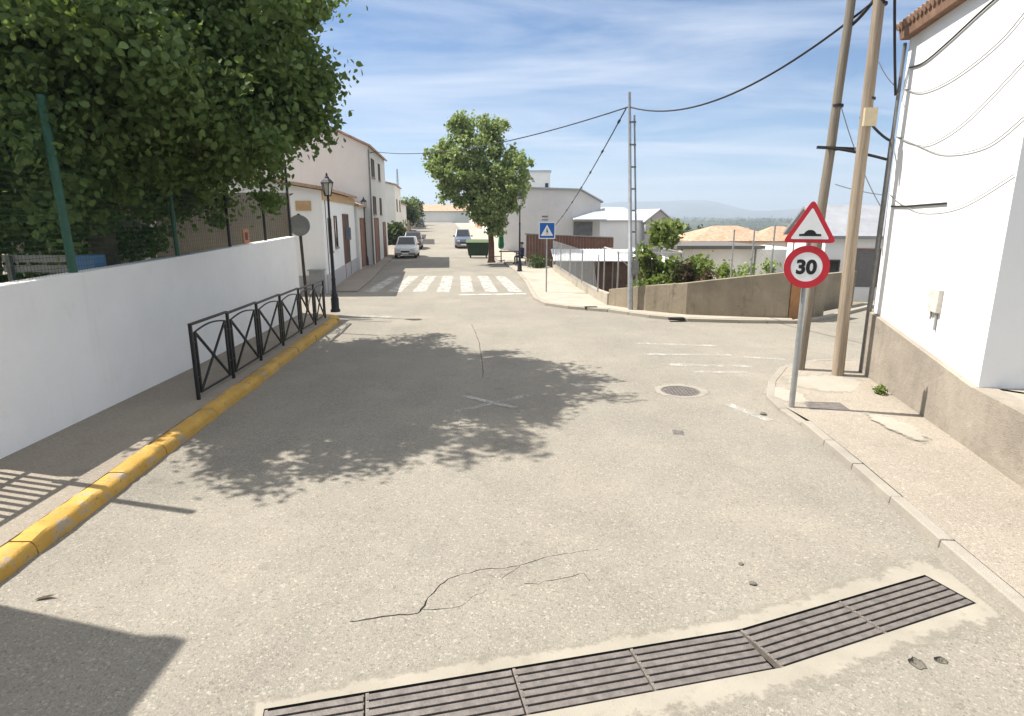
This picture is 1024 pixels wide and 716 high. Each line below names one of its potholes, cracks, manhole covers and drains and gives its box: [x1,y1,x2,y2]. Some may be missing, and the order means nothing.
pothole [908,656,928,670]
drain grate [512,650,653,715]
drain grate [839,577,973,634]
manhole cover [660,386,701,397]
crack [350,549,598,622]
drain grate [740,602,883,668]
drain grate [630,631,772,691]
drain grate [365,670,525,716]
drain grate [263,695,365,716]
